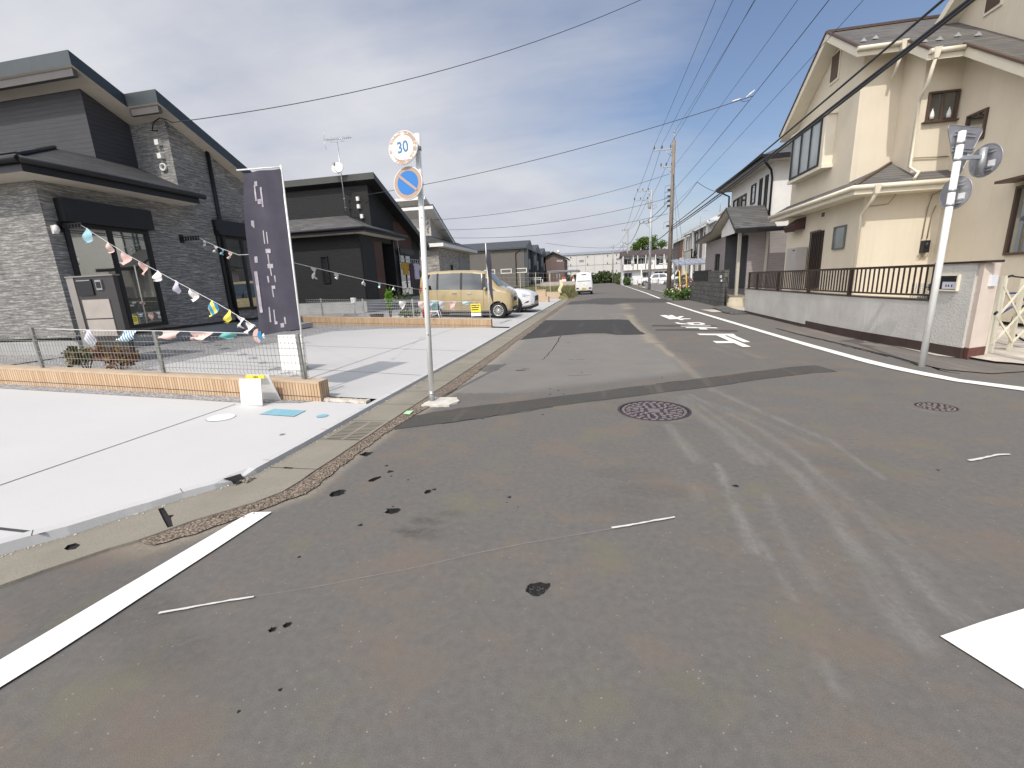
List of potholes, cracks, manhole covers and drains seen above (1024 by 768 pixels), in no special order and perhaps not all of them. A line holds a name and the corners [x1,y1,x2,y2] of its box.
drain grate [327,422,380,440]
pothole [524,581,553,596]
manhole cover [914,402,959,412]
manhole cover [618,401,692,421]
